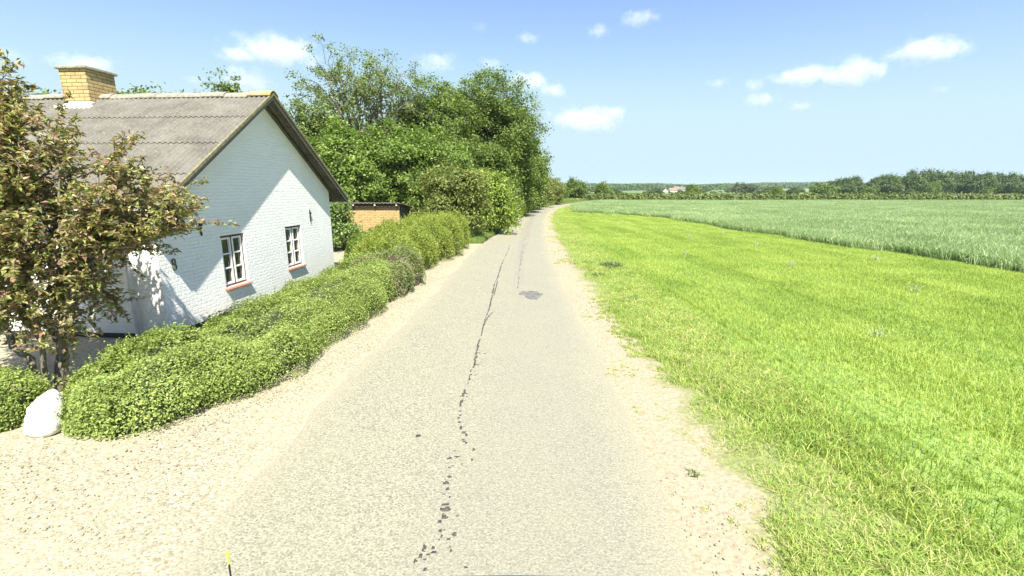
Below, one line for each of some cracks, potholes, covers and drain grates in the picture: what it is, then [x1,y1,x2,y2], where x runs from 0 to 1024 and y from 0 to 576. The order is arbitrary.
crack [413,245,523,571]
